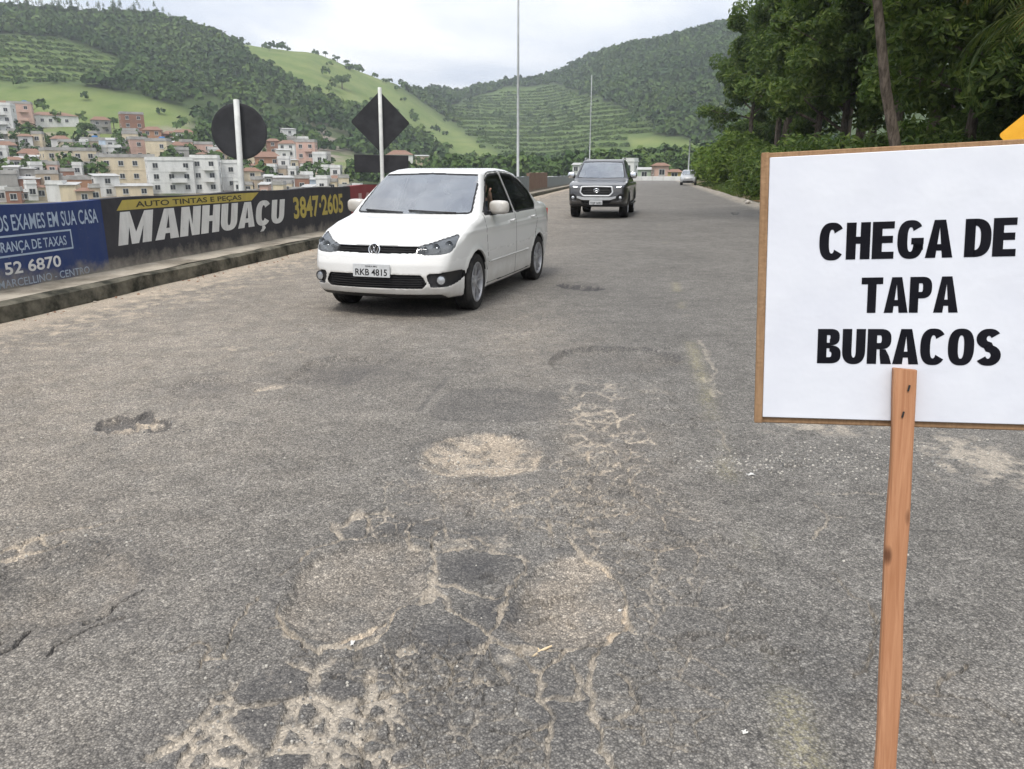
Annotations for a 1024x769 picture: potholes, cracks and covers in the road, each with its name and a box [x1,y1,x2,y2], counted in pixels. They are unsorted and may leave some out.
crack [144,306,741,769]
crack [0,590,144,657]
pothole [94,410,174,436]
